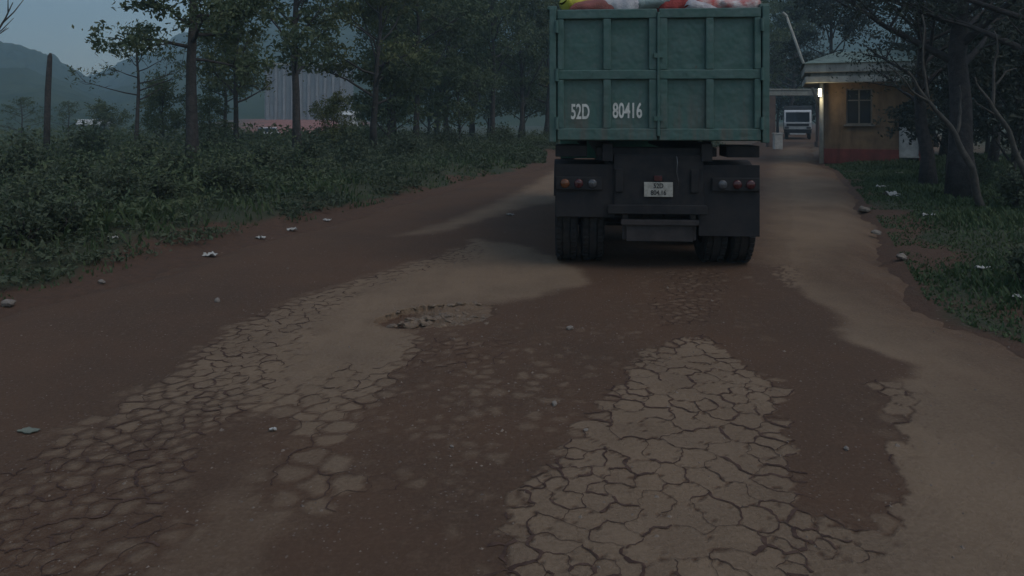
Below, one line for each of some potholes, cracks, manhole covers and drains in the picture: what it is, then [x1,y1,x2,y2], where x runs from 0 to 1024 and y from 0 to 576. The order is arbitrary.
pothole [361,301,509,333]
crack [648,268,732,326]
crack [0,246,480,576]
crack [483,334,909,576]
